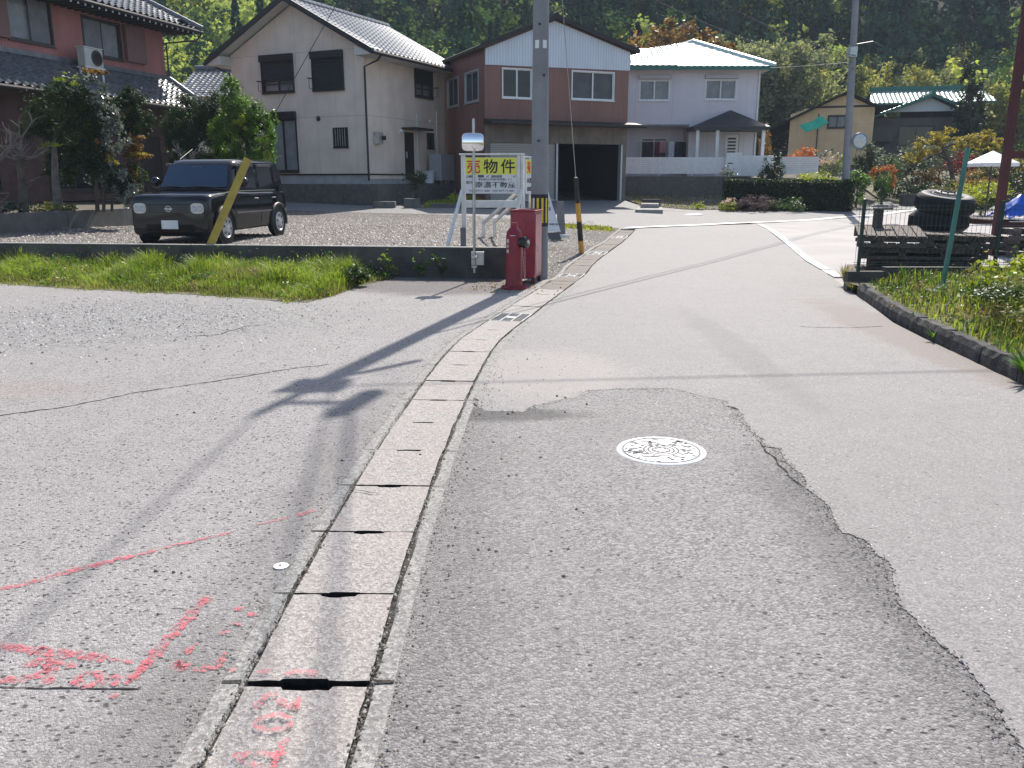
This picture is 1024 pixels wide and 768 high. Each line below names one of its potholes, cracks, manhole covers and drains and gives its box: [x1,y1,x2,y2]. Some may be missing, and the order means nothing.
crack [0,364,328,416]
drain grate [489,313,532,322]
manhole cover [616,437,707,465]
